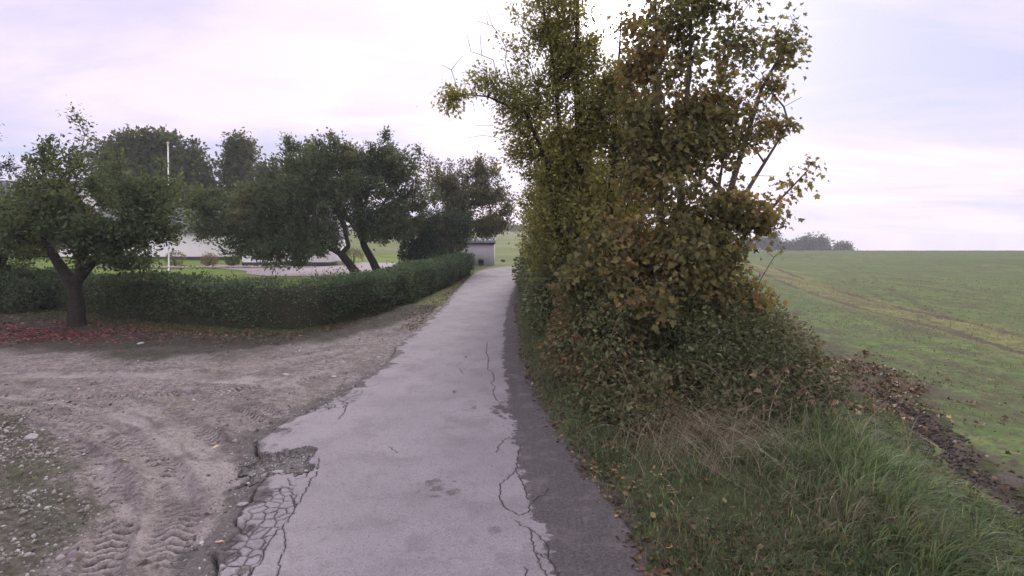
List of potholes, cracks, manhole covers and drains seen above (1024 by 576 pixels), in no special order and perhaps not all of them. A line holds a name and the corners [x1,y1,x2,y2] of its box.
crack [314,386,362,420]
pothole [236,445,319,489]
crack [496,438,559,576]
crack [215,459,320,576]
